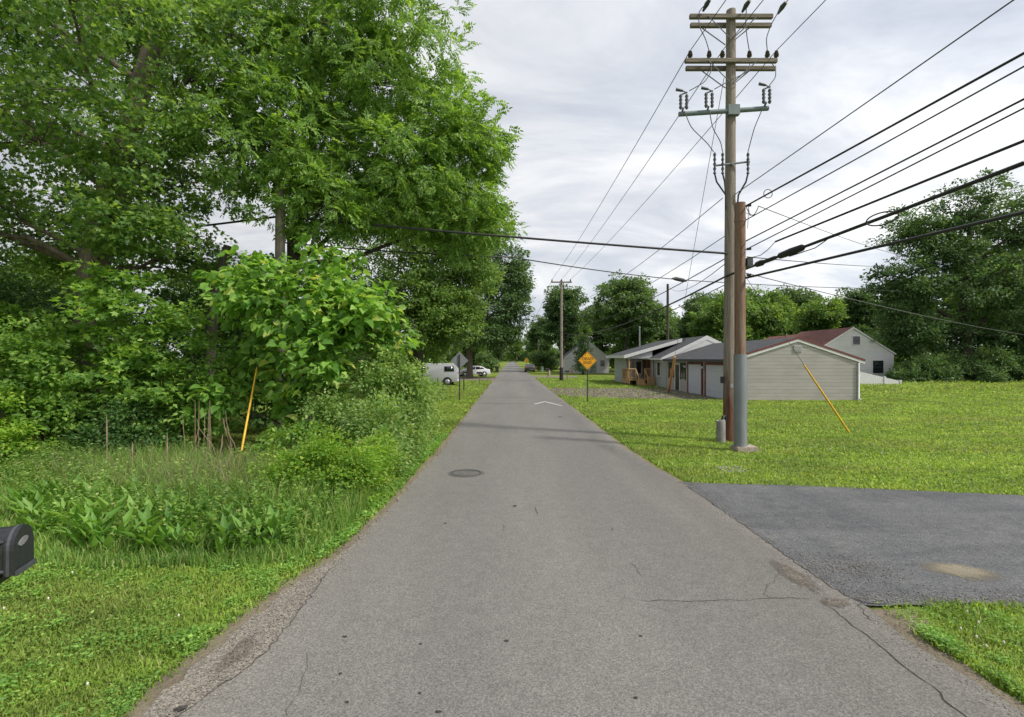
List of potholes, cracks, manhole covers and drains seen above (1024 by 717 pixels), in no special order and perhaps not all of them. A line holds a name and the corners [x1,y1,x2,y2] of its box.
manhole cover [448,469,484,477]
crack [632,571,791,602]
crack [819,599,967,717]
crack [177,565,336,717]
